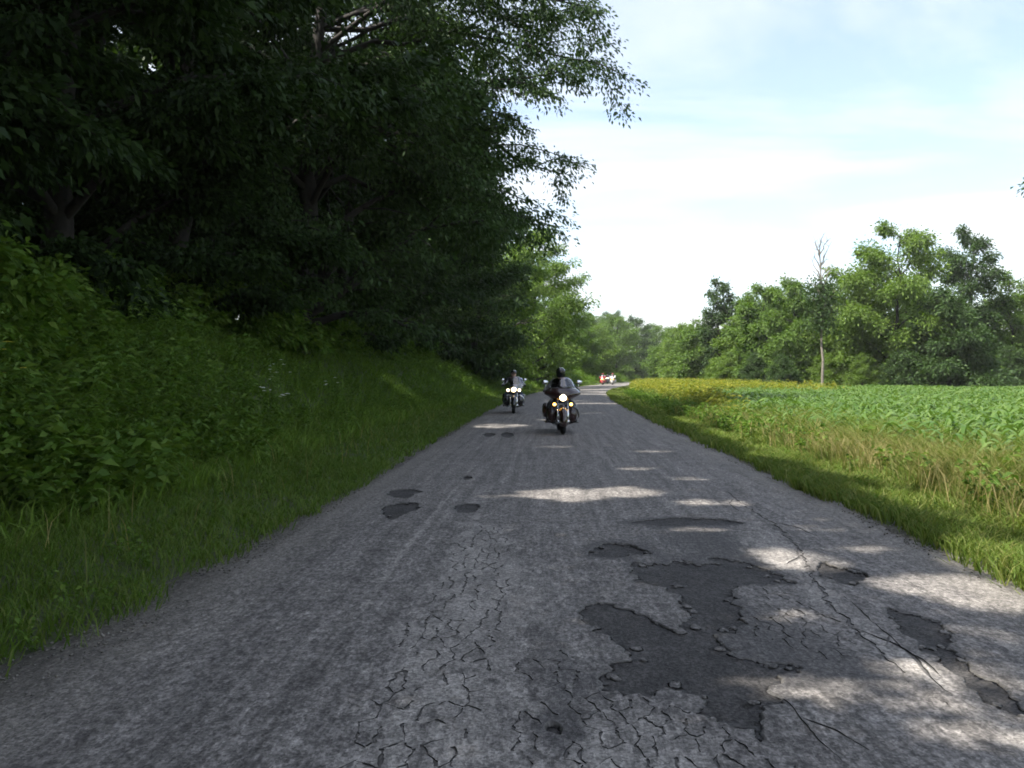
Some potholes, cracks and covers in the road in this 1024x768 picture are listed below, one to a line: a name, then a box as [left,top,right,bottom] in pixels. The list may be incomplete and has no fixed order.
crack [339,525,509,768]
pothole [386,489,423,498]
pothole [452,503,481,513]
pothole [575,556,804,742]
pothole [884,607,1024,718]
crack [510,650,870,768]
pothole [380,502,421,520]
pothole [816,561,871,586]
crack [720,489,980,726]
pothole [586,542,653,558]
pothole [630,517,744,527]
